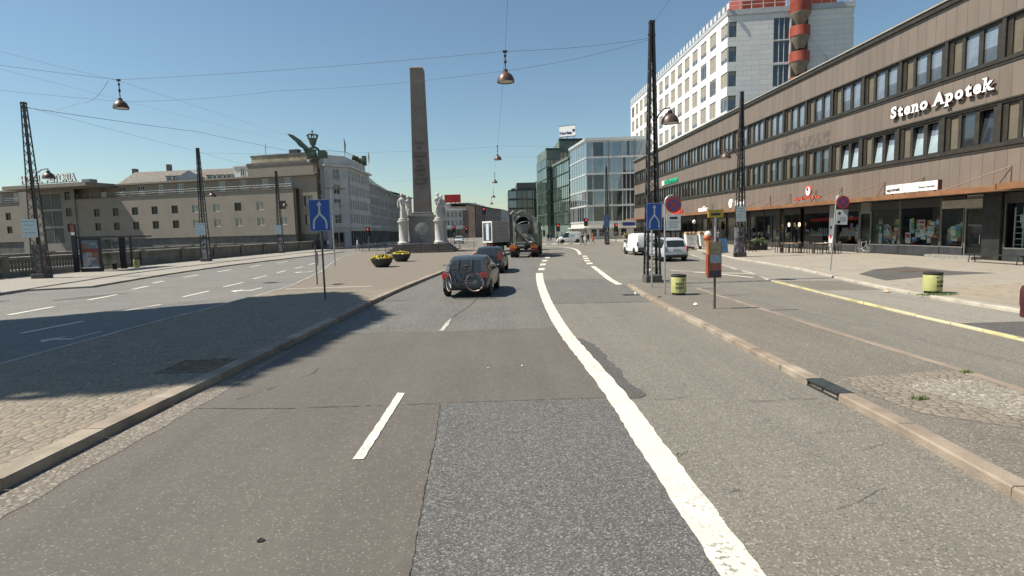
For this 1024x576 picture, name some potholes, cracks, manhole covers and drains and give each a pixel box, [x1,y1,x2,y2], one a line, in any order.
drain grate [806,378,854,401]
manhole cover [154,358,235,374]
